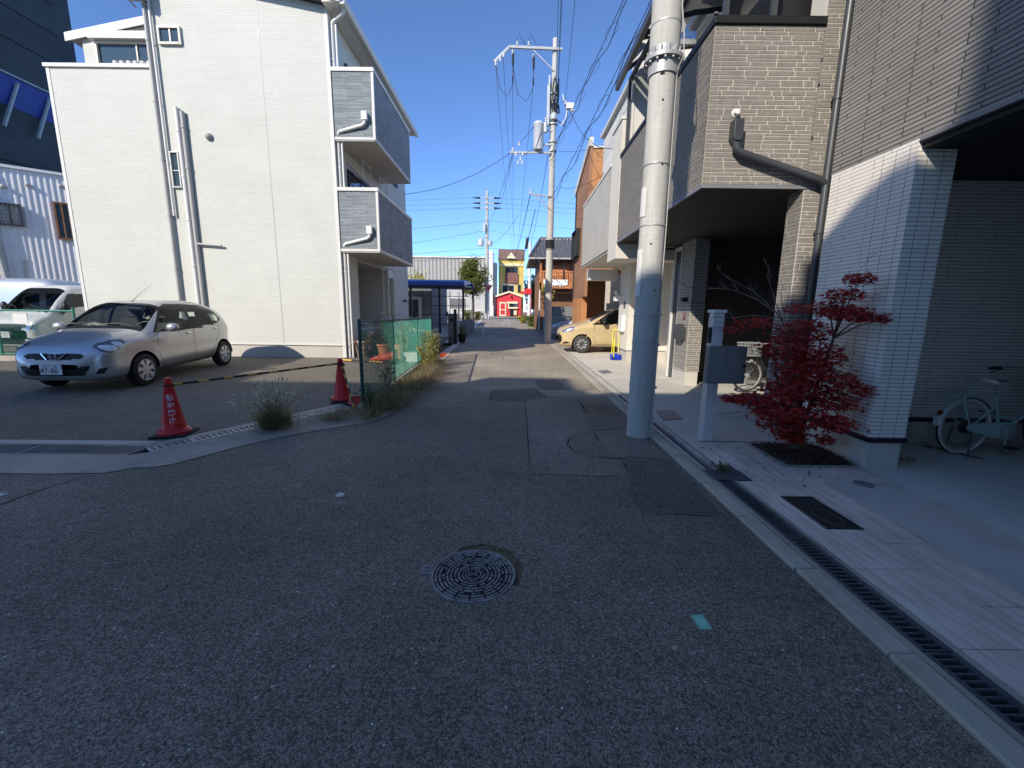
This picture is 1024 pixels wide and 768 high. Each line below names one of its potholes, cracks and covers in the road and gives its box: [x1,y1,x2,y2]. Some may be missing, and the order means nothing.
manhole cover [419,550,516,603]
utility cover [780,496,864,530]
drain grate [922,652,1024,737]
drain grate [146,438,196,452]
utility cover [655,410,683,420]
drain grate [786,538,954,653]
drain grate [191,423,259,441]
drain grate [718,481,807,538]
drain grate [310,405,349,415]
utility cover [852,480,874,488]
